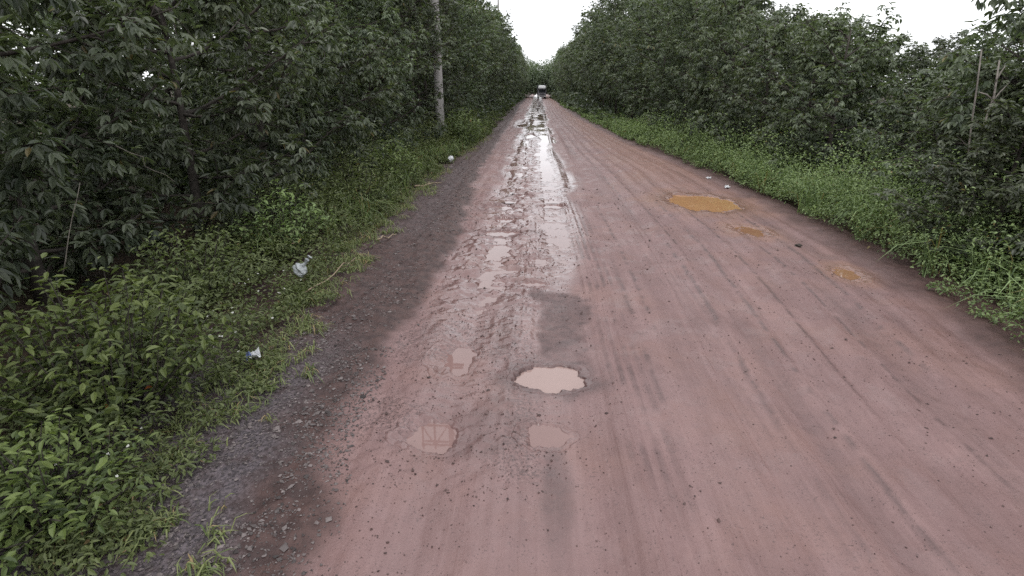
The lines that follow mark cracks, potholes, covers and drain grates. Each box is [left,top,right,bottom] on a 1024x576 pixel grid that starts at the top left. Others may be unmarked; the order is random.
pothole [506,362,595,396]
pothole [384,411,472,458]
pothole [480,215,524,223]
pothole [421,339,482,383]
pothole [512,277,550,289]
pothole [511,419,580,452]
pothole [520,252,554,269]
pothole [475,201,518,211]
pothole [822,264,875,284]
pothole [475,227,529,238]
pothole [512,120,530,128]
